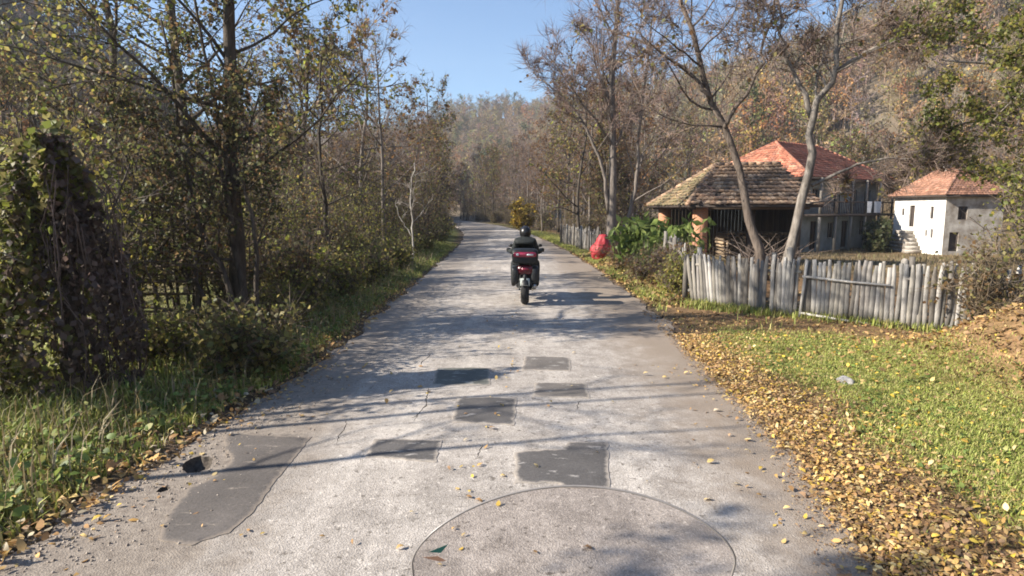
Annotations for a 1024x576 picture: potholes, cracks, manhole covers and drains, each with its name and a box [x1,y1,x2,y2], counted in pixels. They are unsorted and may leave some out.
pothole [182,456,213,473]
